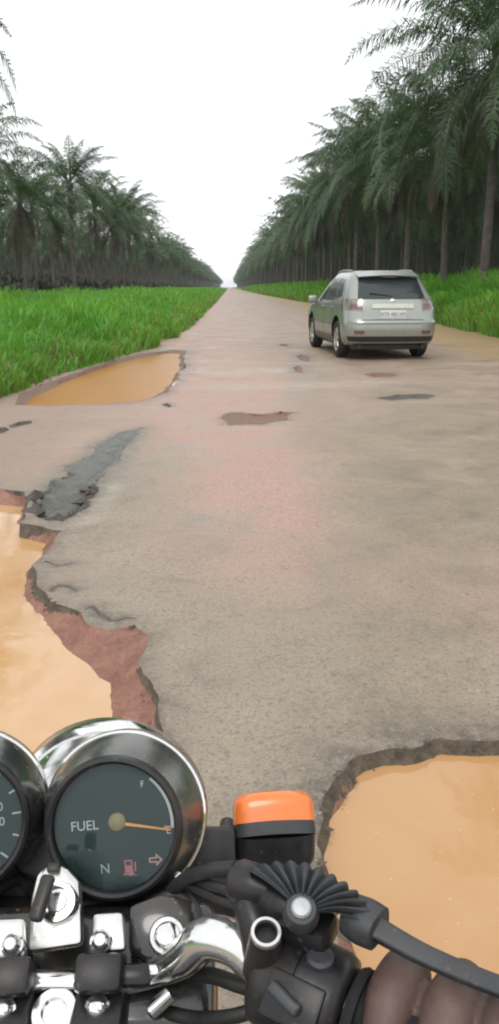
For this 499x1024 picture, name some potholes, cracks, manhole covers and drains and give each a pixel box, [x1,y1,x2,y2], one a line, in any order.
pothole [316,738,499,979]
pothole [15,350,186,406]
pothole [0,489,164,753]
pothole [221,411,292,425]
